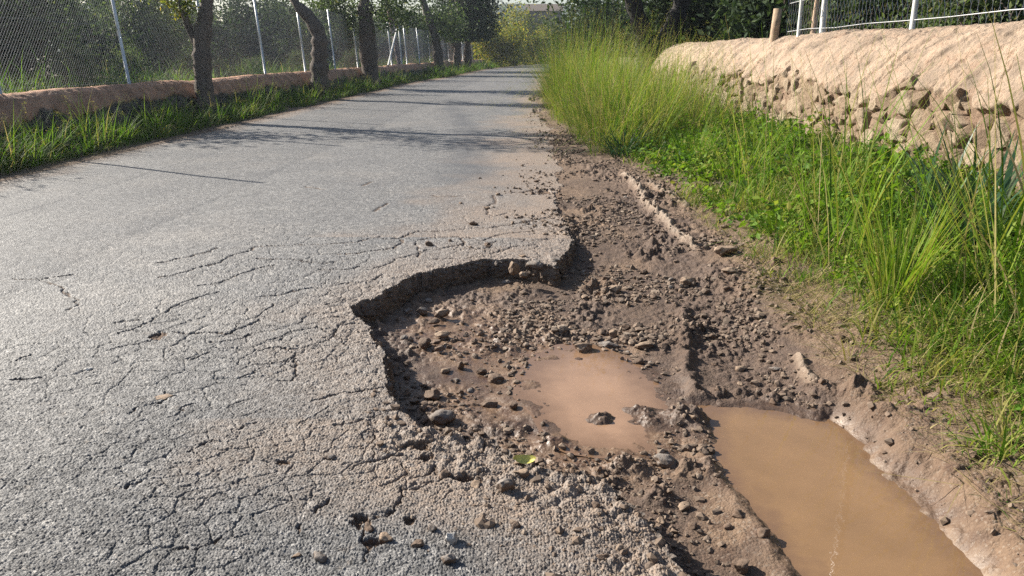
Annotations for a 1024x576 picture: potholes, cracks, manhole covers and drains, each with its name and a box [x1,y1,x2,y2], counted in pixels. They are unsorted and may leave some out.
crack [178,536,223,551]
crack [9,354,43,381]
crack [132,395,194,417]
crack [297,387,486,563]
pothole [352,222,691,576]
crack [107,190,554,382]
crack [12,274,80,310]
